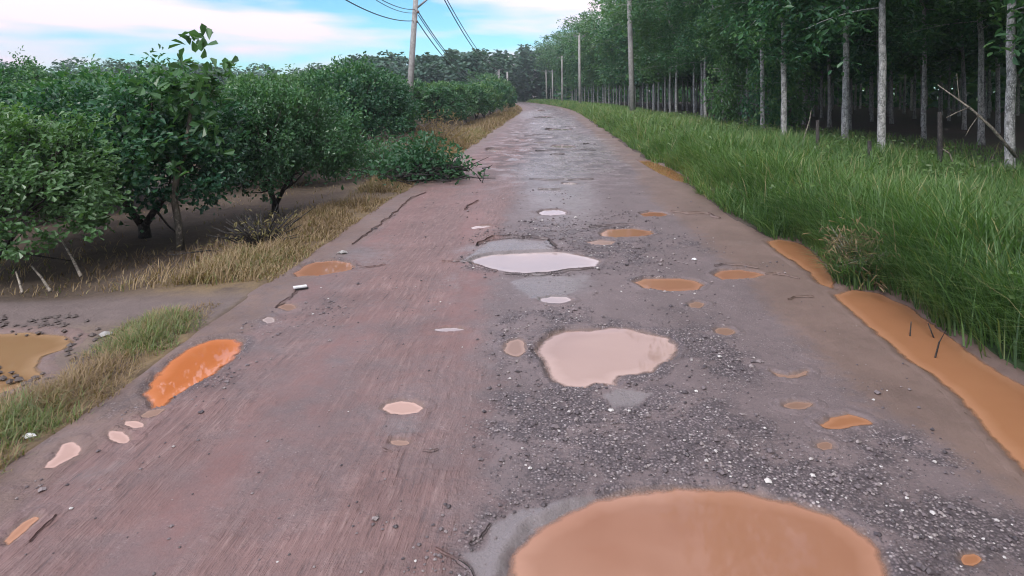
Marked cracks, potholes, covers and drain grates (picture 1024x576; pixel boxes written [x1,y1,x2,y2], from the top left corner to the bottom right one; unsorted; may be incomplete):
pothole [127,332,257,410]
pothole [530,322,688,392]
crack [352,192,594,276]
pothole [624,274,713,293]
pothole [493,334,533,362]
pothole [533,208,572,216]
pothole [485,475,912,576]
pothole [283,257,364,279]
pothole [594,226,661,238]
pothole [704,266,774,281]
pothole [458,248,609,275]
